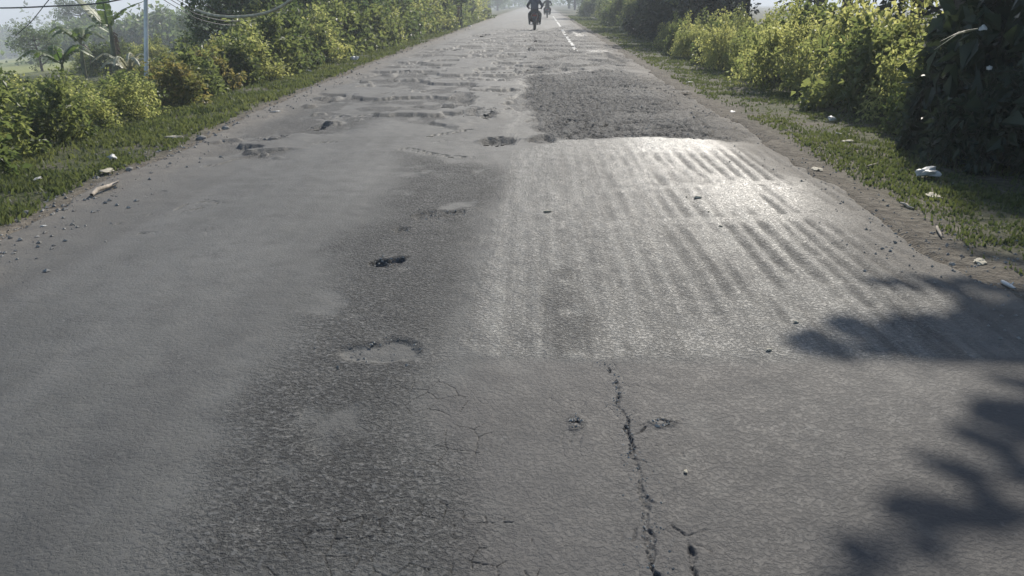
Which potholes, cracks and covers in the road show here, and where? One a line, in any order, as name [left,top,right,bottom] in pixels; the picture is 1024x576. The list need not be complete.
pothole [642,415,683,431]
pothole [475,108,503,119]
crack [222,370,569,576]
crack [549,358,740,576]
pothole [304,121,336,131]
pothole [559,412,592,436]
pothole [521,133,563,143]
pothole [321,331,438,370]
pothole [472,136,524,147]
